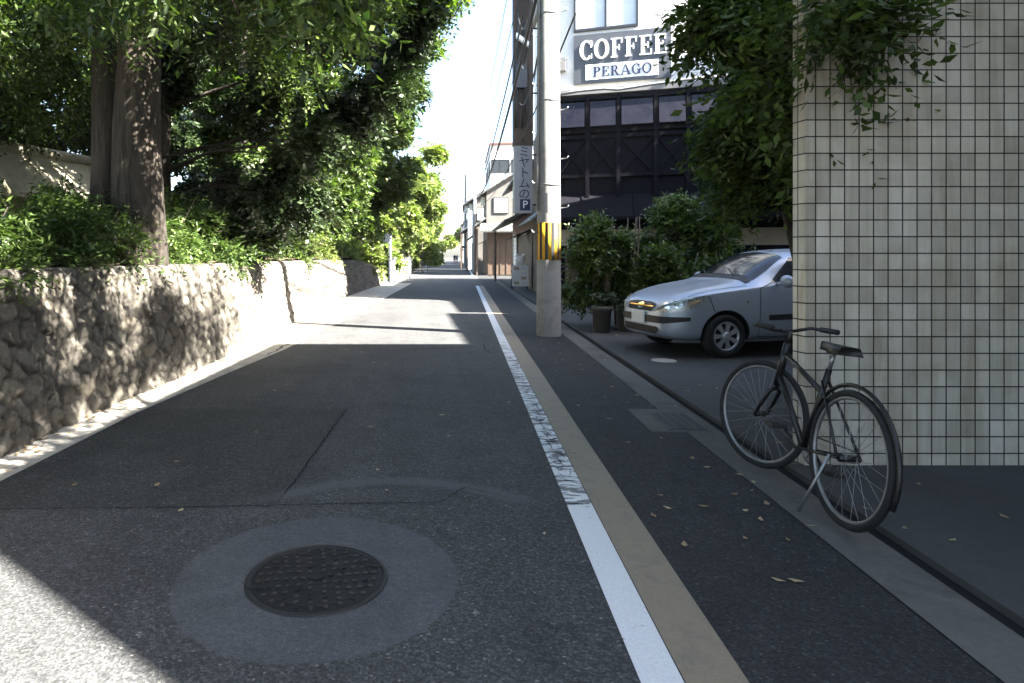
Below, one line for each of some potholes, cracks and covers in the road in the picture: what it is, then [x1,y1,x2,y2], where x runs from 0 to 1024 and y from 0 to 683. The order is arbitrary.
manhole cover [244,544,388,618]
drain grate [627,409,713,433]
